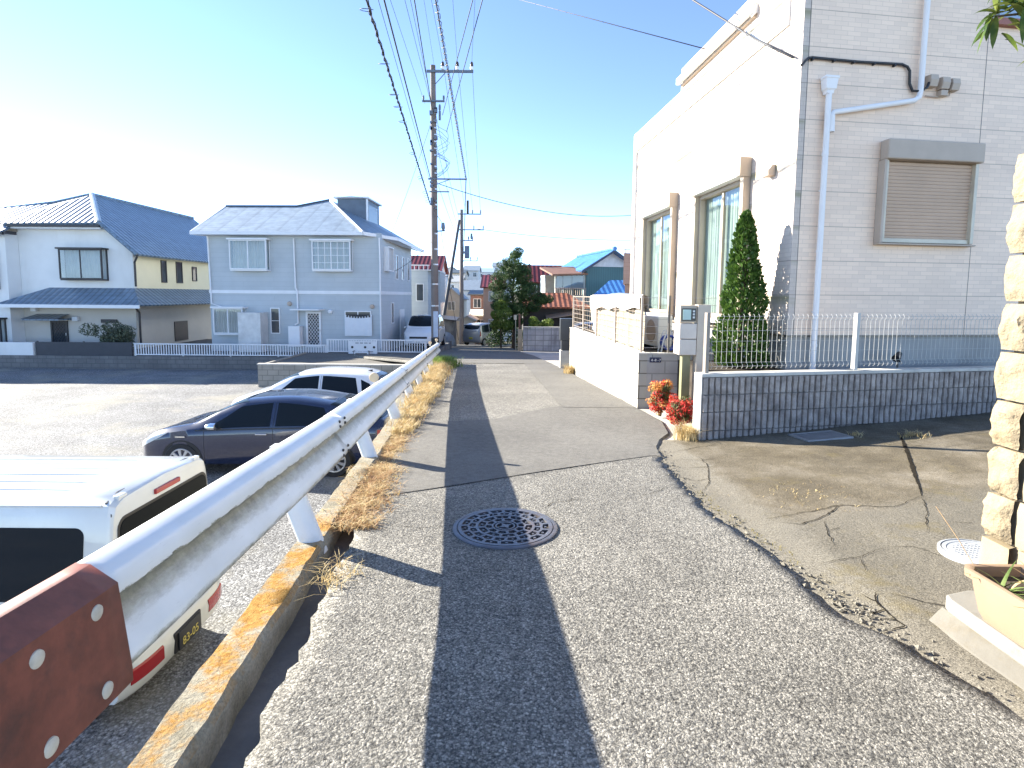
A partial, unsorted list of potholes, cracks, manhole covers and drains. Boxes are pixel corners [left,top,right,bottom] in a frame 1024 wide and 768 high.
crack [864,592,942,629]
crack [767,495,921,570]
manhole cover [453,508,558,550]
manhole cover [937,539,981,564]
